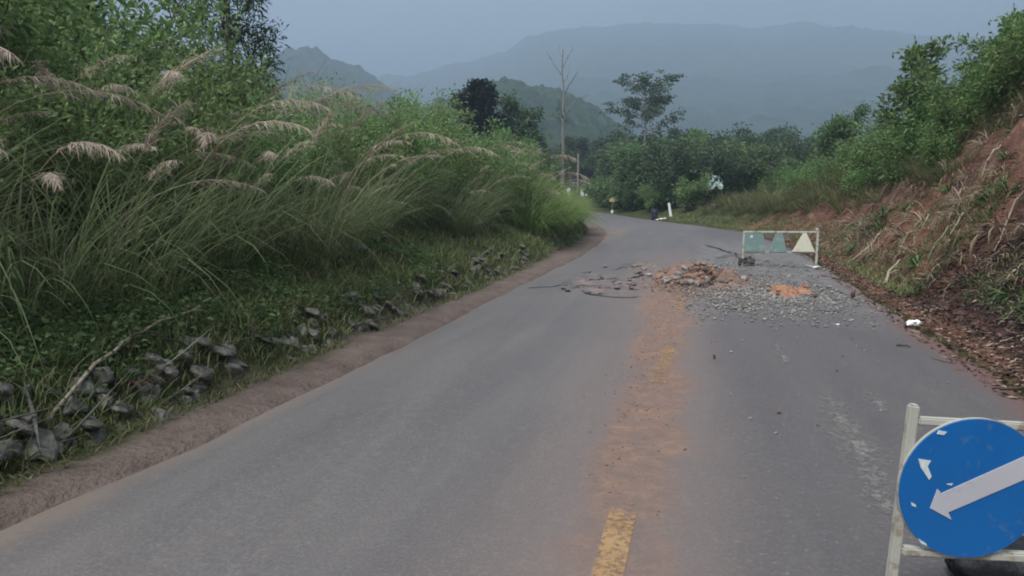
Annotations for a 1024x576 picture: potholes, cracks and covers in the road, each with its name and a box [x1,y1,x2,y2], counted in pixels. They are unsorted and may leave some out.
pothole [567,275,651,294]
crack [706,245,769,262]
